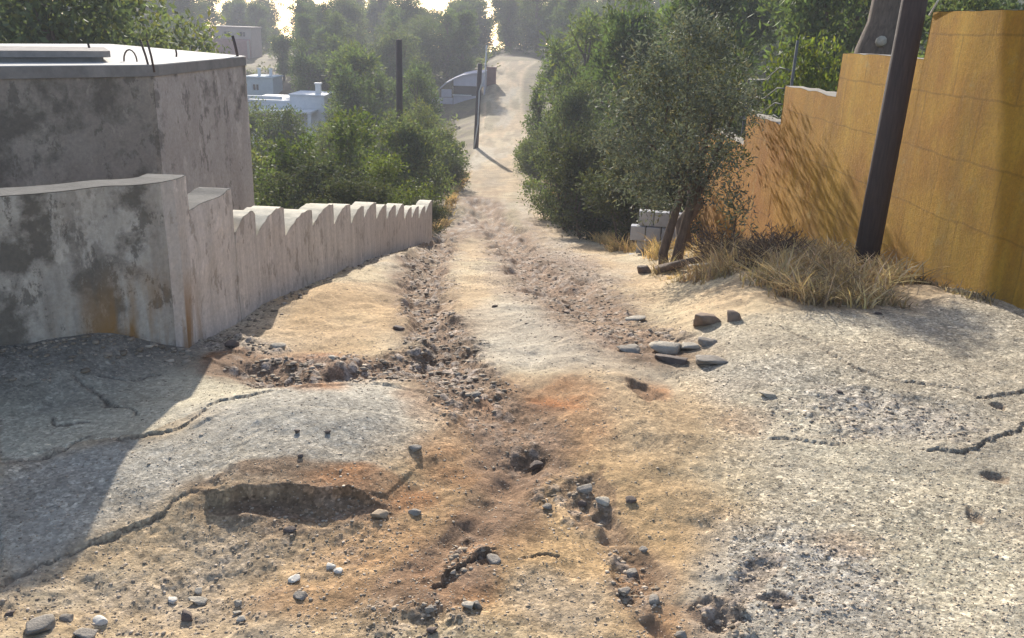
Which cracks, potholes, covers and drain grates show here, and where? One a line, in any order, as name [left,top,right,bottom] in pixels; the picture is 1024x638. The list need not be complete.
pothole [626,376,668,405]
pothole [519,444,558,479]
crack [52,371,157,427]
crack [972,437,998,451]
crack [89,522,141,547]
crack [431,566,460,590]
pothole [980,470,1011,484]
pothole [204,486,399,523]
